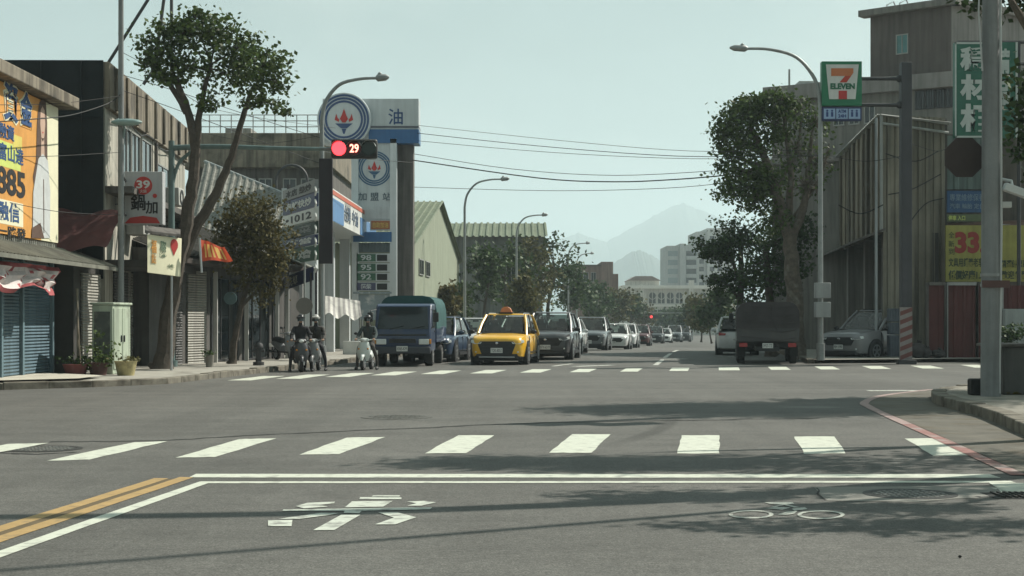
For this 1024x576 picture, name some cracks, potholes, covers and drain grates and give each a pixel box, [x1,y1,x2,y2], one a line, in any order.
manhole cover [863,489,959,499]
drain grate [980,491,1024,499]
